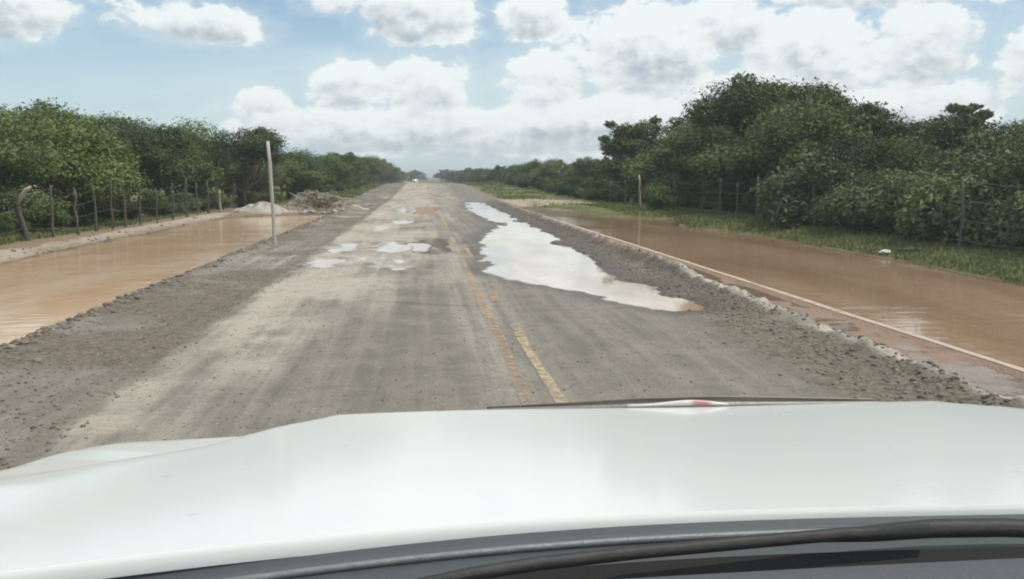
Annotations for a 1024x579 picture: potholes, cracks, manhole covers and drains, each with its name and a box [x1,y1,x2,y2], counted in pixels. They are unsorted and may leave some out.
pothole [303,257,354,268]
pothole [373,241,431,254]
pothole [460,201,733,313]
